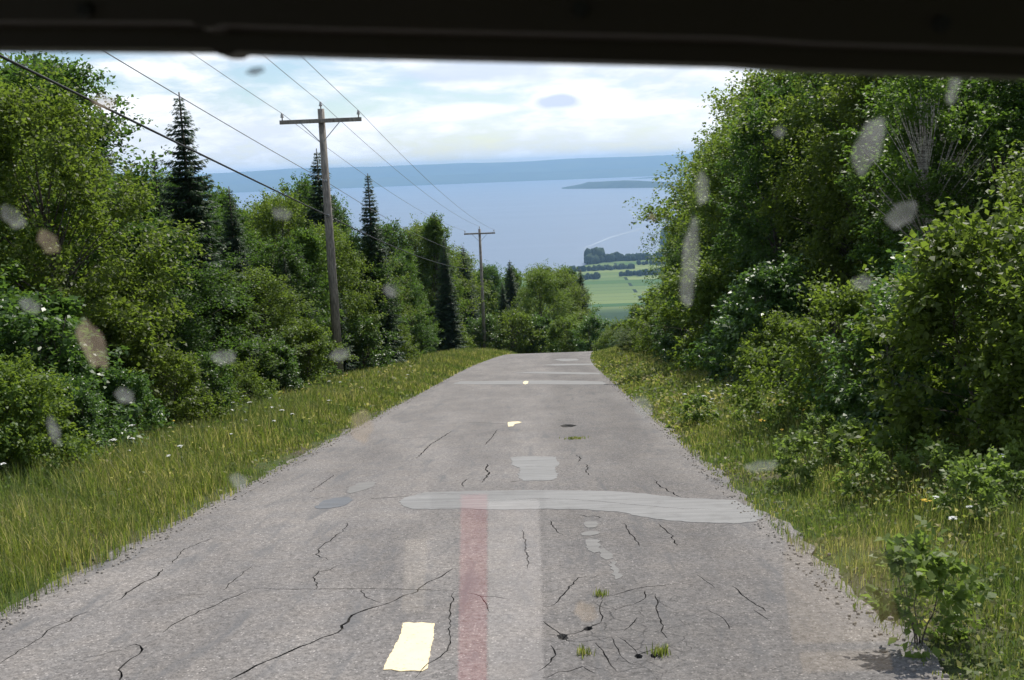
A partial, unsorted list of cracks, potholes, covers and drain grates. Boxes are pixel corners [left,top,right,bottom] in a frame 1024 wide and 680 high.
crack [710,587,772,629]
crack [539,576,667,678]
crack [165,524,506,680]
crack [114,538,212,602]
crack [406,420,503,458]
crack [2,612,86,662]
crack [90,644,144,680]
